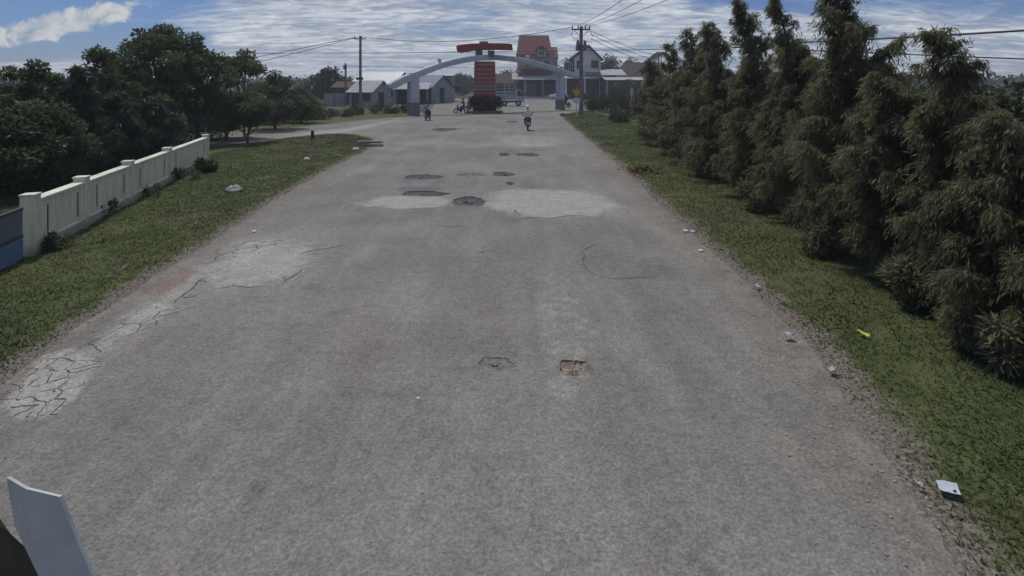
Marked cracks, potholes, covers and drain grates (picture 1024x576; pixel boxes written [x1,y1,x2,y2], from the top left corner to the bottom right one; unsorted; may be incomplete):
pothole [453,196,486,206]
crack [581,244,644,279]
pothole [478,357,516,369]
pothole [560,360,590,376]
crack [0,240,349,417]
